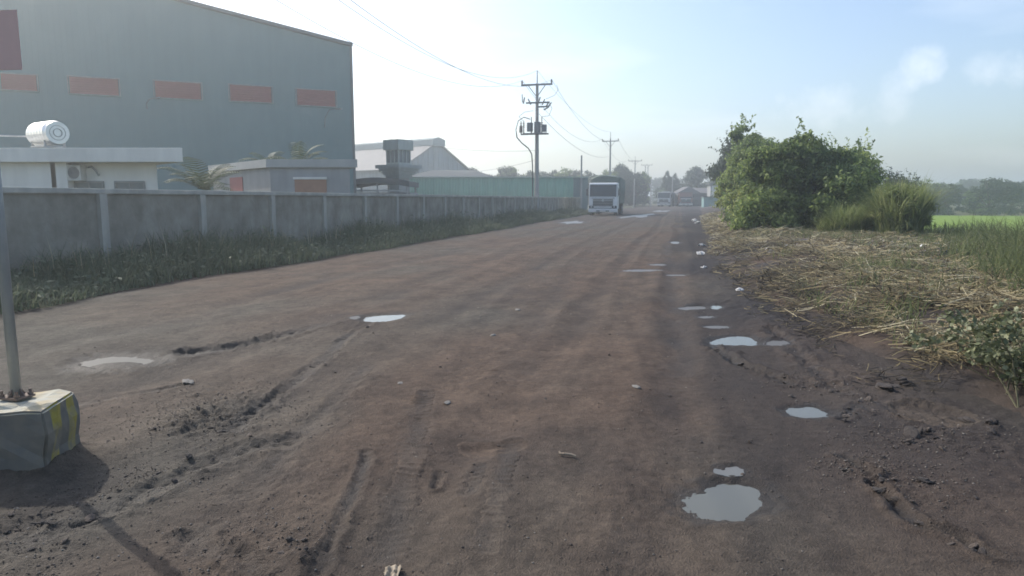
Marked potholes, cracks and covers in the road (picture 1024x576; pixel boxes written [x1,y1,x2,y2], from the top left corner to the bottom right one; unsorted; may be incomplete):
pothole [713,462,748,477]
pothole [780,404,838,420]
pothole [763,338,791,346]
pothole [64,353,170,373]
pothole [358,313,408,322]
pothole [676,476,777,523]
pothole [705,335,760,347]
